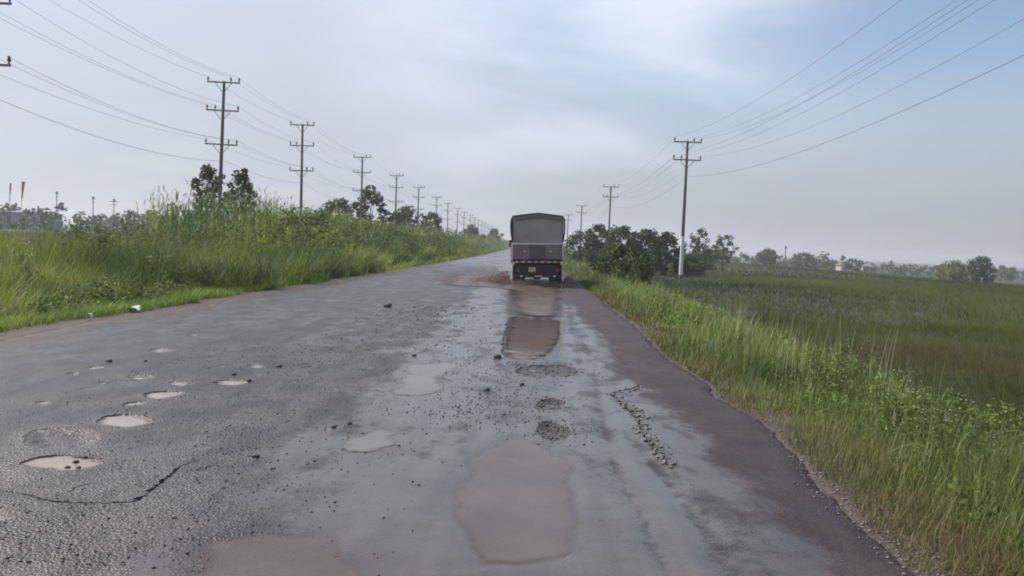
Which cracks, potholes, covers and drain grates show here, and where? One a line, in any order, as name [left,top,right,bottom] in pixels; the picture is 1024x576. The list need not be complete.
pothole [500,317,567,360]
crack [1,458,218,515]
pothole [536,420,574,441]
pothole [143,390,185,399]
pothole [514,364,578,378]
pothole [535,397,564,409]
pothole [96,414,154,427]
crack [604,384,681,468]
pothole [19,454,104,471]
